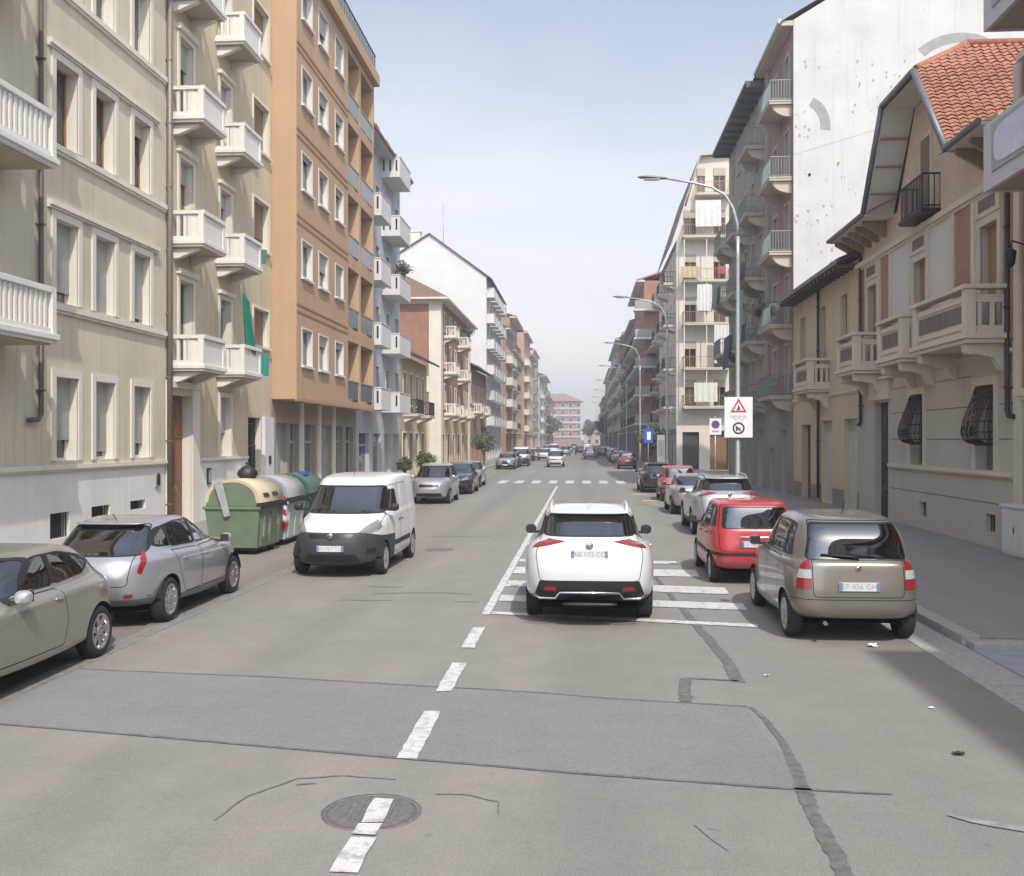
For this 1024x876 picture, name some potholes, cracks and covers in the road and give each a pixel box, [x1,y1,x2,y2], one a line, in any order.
crack [214,775,499,820]
manhole cover [321,794,422,831]
crack [694,824,729,851]
